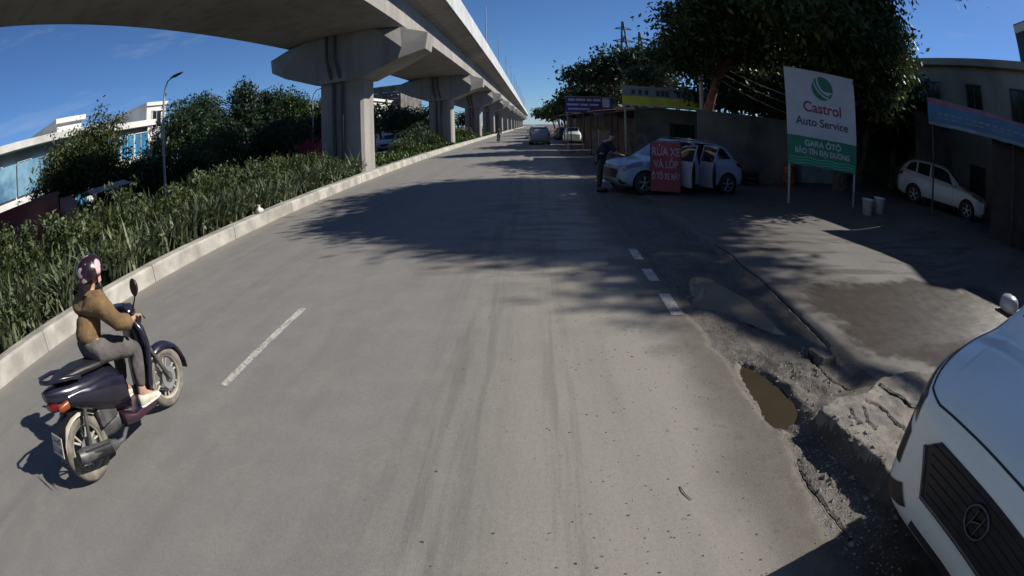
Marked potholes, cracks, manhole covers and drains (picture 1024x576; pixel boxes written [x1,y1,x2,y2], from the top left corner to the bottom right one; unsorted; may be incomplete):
crack [794,459,854,541]
pothole [733,361,816,443]
crack [715,244,916,432]
